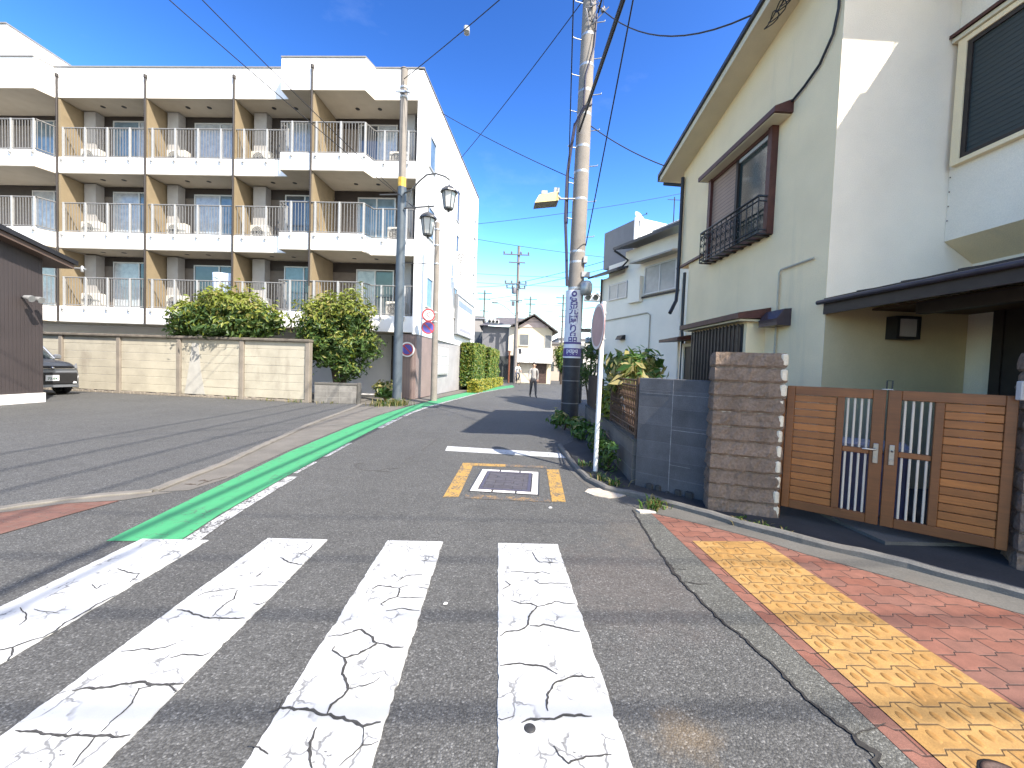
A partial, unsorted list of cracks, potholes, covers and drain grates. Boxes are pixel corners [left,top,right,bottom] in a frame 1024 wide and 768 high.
crack [499,662,592,723]
crack [126,643,211,658]
crack [373,560,428,611]
crack [177,544,313,619]
crack [248,629,404,768]
crack [554,746,612,764]
crack [15,680,184,766]
manhole cover [469,469,539,495]
crack [500,552,580,636]
crack [633,510,885,768]
crack [0,568,140,660]
